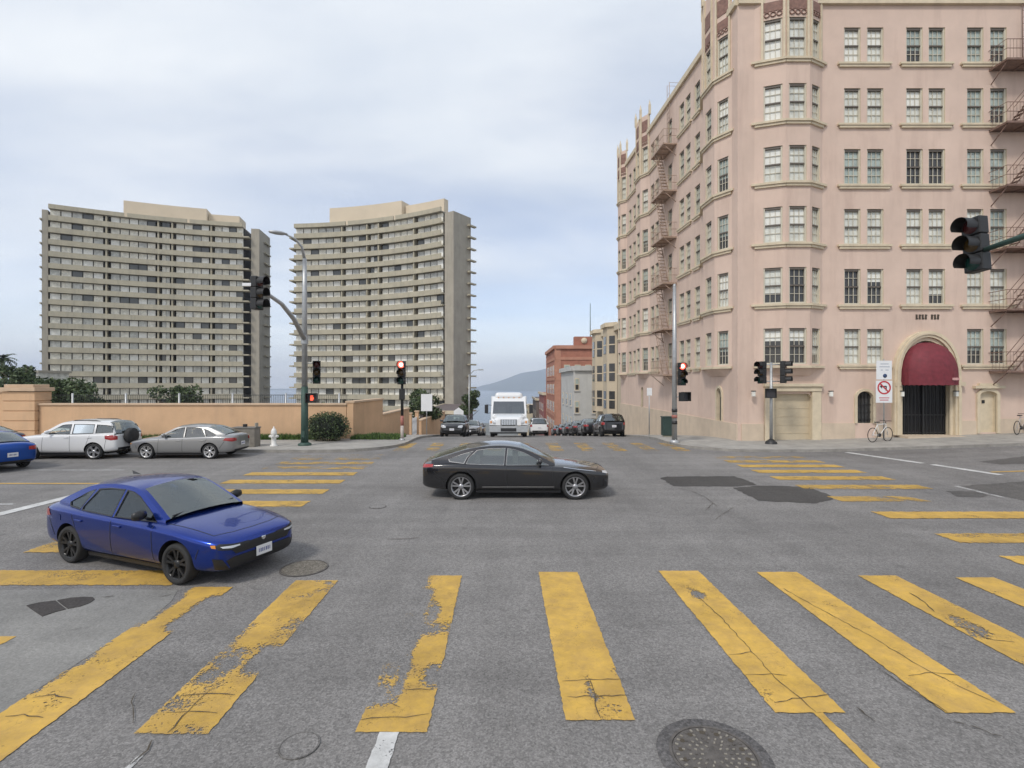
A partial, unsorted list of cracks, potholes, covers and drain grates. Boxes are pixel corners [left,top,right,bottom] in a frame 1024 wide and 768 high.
manhole cover [278,731,320,760]
crack [698,596,829,712]
crack [565,678,624,718]
crack [130,689,235,764]
crack [785,589,1001,736]
manhole cover [279,560,329,577]
manhole cover [656,719,776,768]
